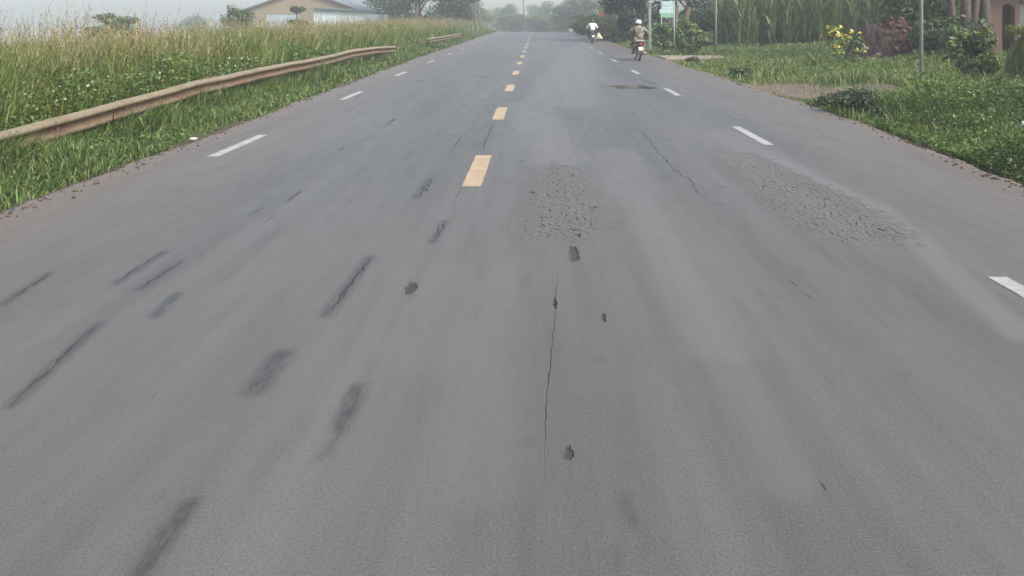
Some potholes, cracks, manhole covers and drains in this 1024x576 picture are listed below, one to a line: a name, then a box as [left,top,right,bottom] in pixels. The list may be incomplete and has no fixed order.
crack [117,253,180,288]
crack [499,161,625,246]
crack [643,131,928,251]
pothole [569,246,580,262]
crack [15,324,99,401]
pothole [562,445,574,461]
pothole [404,282,418,295]
crack [544,277,558,480]
crack [328,258,370,314]
